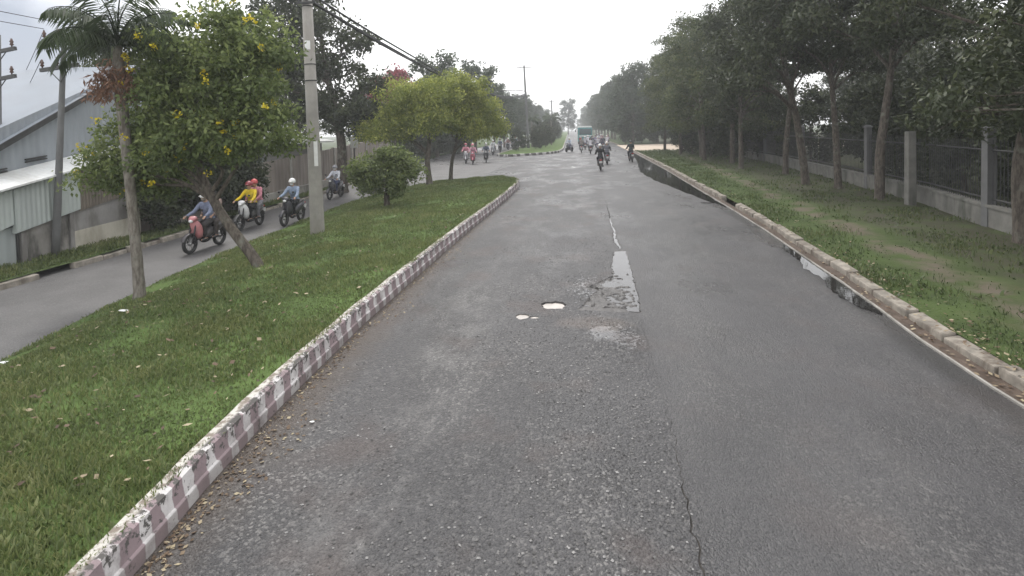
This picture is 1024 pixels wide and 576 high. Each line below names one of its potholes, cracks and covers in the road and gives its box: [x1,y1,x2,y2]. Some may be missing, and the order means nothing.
crack [640,317,705,576]
pothole [578,250,642,313]
pothole [541,301,566,309]
